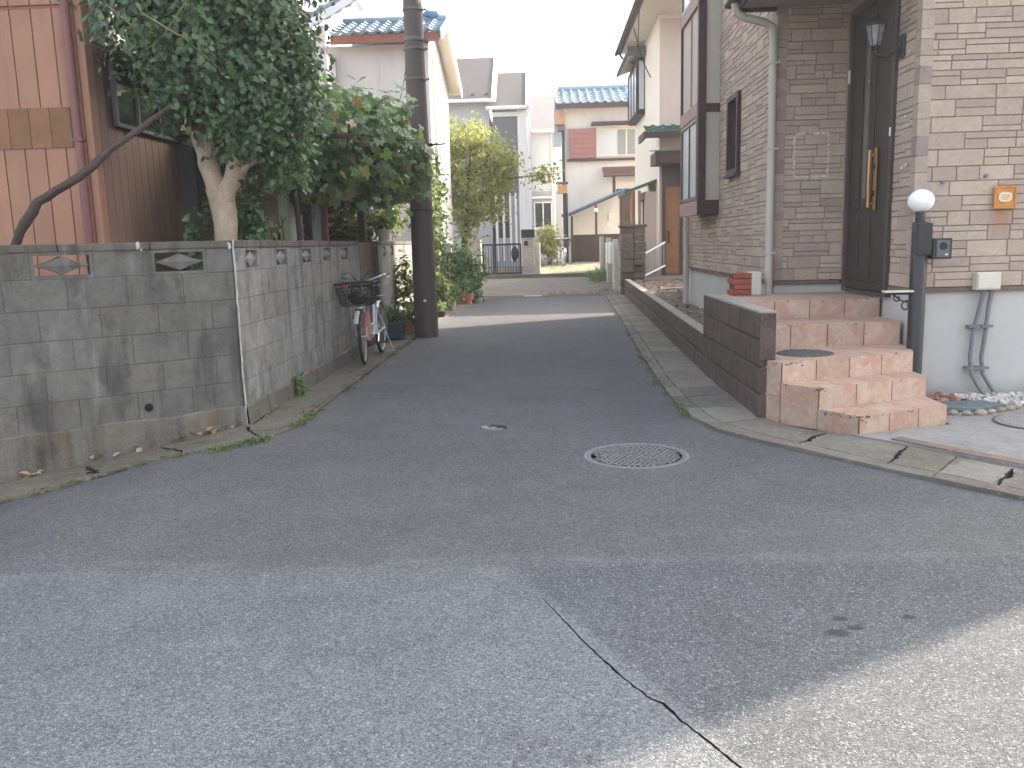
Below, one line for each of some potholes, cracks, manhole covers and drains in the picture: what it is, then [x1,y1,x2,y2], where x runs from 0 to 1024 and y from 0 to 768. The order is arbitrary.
manhole cover [584,443,689,469]
crack [544,600,742,768]
